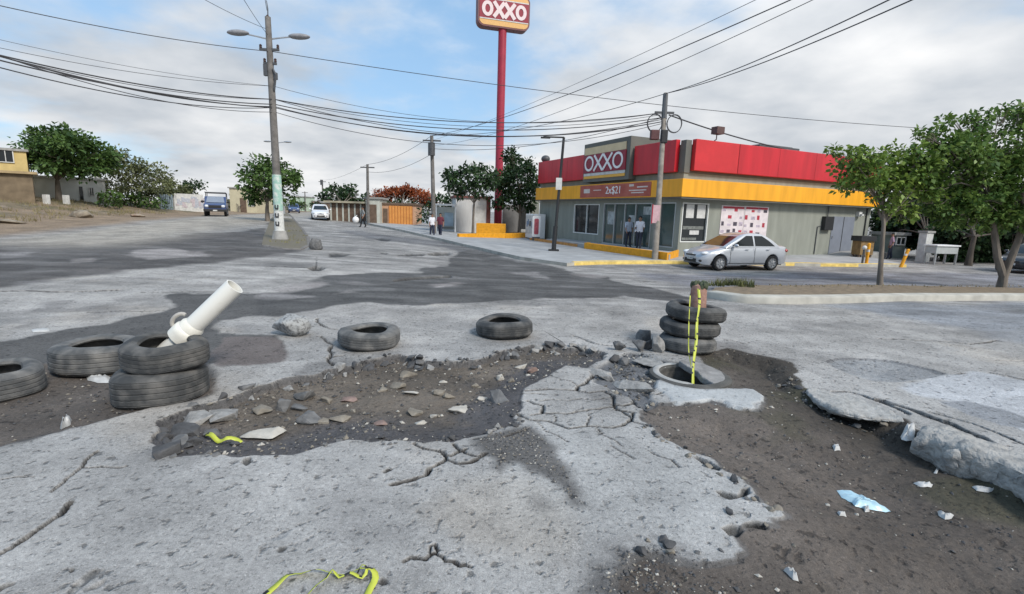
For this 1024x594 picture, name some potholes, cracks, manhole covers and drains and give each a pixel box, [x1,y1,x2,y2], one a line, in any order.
pothole [149,344,606,458]
crack [388,374,683,487]
crack [401,543,475,569]
manhole cover [649,360,732,389]
crack [0,450,128,555]
pothole [609,348,1024,594]
